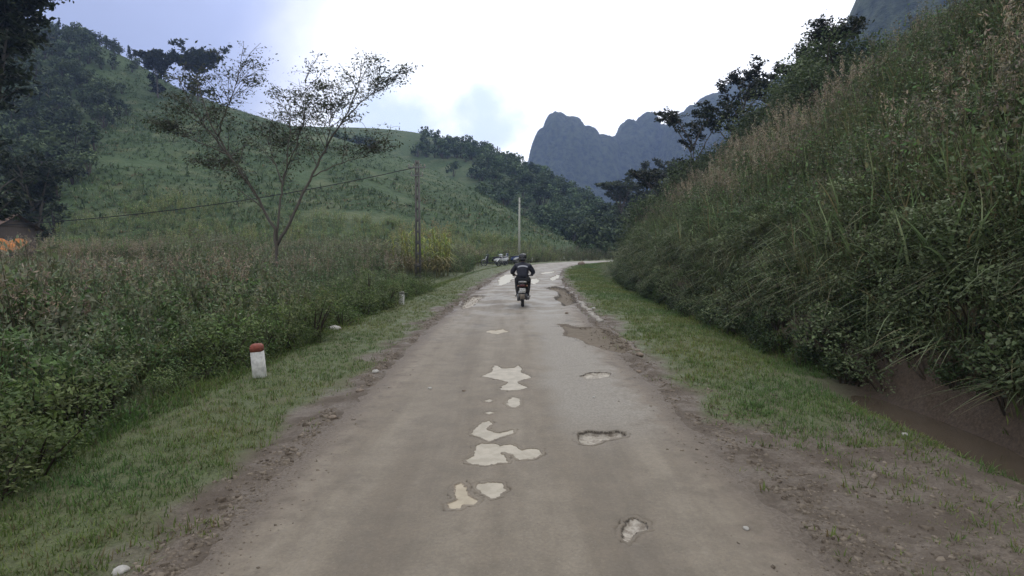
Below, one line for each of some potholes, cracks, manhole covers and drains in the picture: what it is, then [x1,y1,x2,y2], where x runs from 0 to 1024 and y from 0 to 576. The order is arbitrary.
pothole [494,274,517,286]
pothole [468,419,517,443]
pothole [442,479,485,511]
pothole [461,442,546,467]
pothole [503,396,524,409]
pothole [472,480,510,501]
pothole [457,295,486,310]
pothole [573,429,631,446]
pothole [541,286,580,307]
pothole [479,364,534,391]
pothole [575,371,615,379]
pothole [615,515,655,546]
